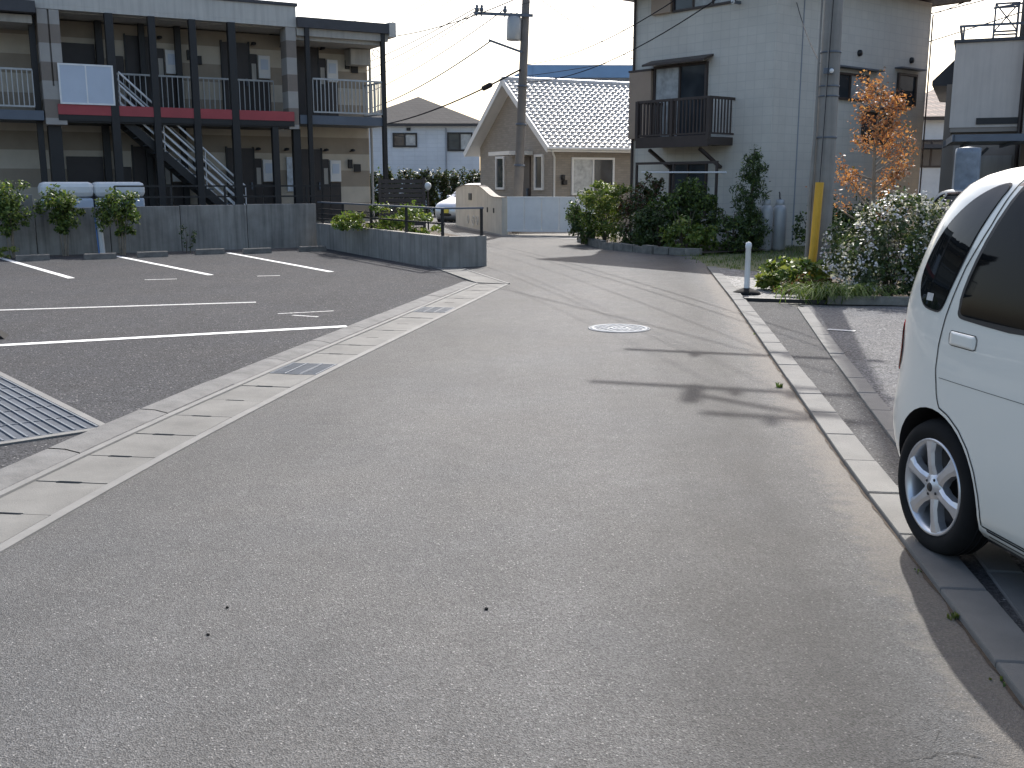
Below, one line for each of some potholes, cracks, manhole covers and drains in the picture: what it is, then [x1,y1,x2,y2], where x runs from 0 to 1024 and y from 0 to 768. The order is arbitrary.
drain grate [270,362,337,375]
drain grate [0,372,105,446]
crack [898,724,1012,765]
manhole cover [588,324,650,333]
